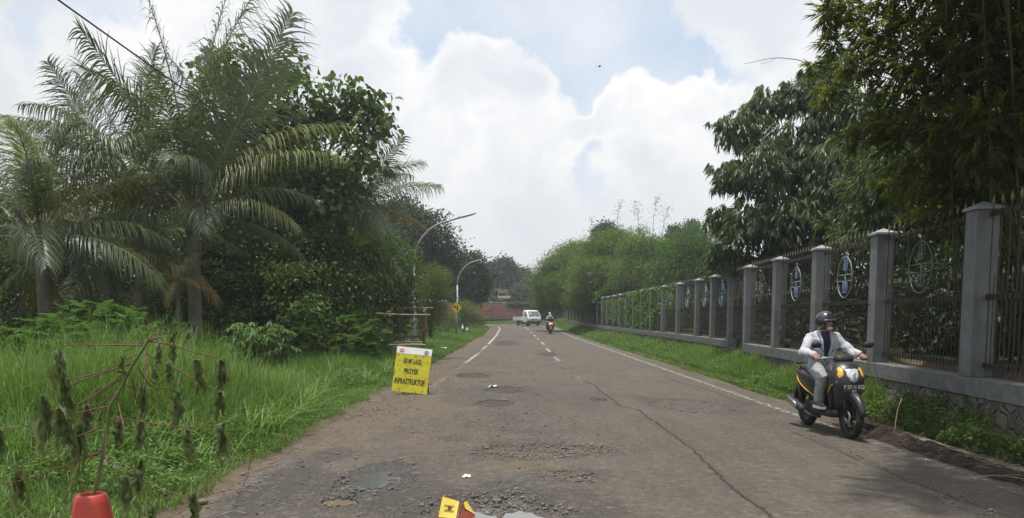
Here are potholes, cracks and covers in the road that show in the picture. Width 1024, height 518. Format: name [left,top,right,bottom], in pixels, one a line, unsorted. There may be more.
pothole [467,441,628,459]
pothole [547,469,598,482]
pothole [473,398,515,407]
crack [537,351,773,518]
pothole [325,457,421,499]
pothole [484,386,526,394]
